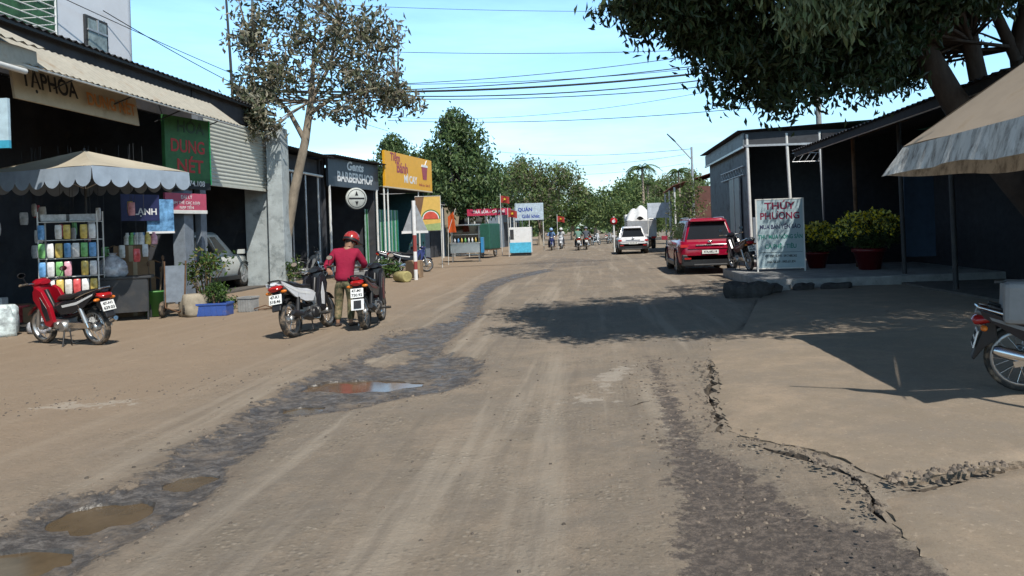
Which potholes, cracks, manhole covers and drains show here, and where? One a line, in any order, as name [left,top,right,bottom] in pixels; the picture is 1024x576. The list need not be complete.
pothole [44,500,156,536]
pothole [0,548,74,576]
crack [744,442,967,523]
crack [703,364,725,434]
pothole [299,379,425,394]
pothole [162,475,220,492]
